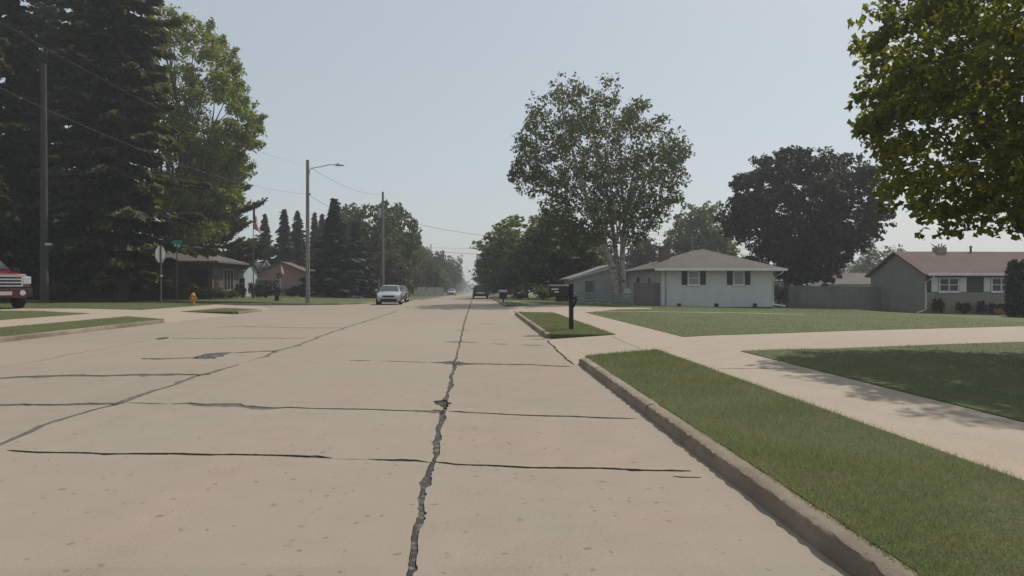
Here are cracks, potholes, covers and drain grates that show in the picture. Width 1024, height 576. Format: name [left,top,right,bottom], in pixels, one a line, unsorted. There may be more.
crack [393,330,574,367]
